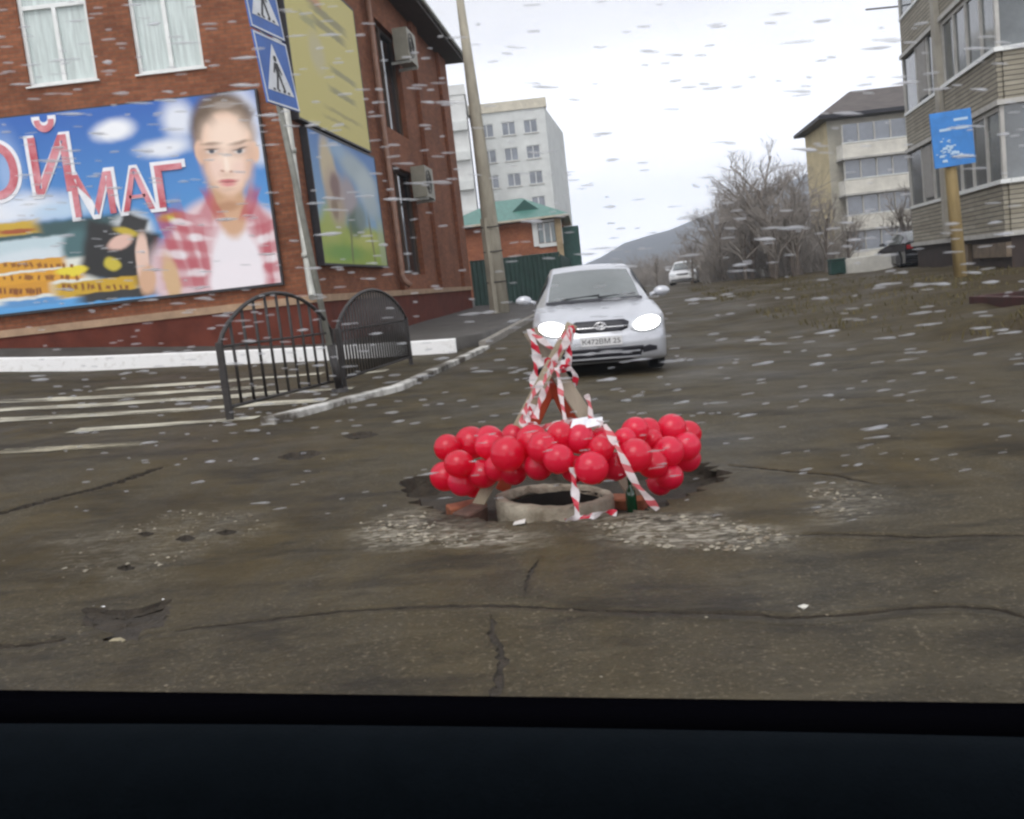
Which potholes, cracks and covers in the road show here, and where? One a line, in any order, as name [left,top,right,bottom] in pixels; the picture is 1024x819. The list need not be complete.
pothole [392,460,741,527]
crack [137,530,1024,697]
pothole [336,430,386,441]
pothole [62,595,187,648]
pothole [269,449,329,462]
pothole [204,527,248,539]
crack [0,465,179,518]
crack [711,463,890,487]
pothole [163,533,207,545]
pothole [127,529,166,540]
